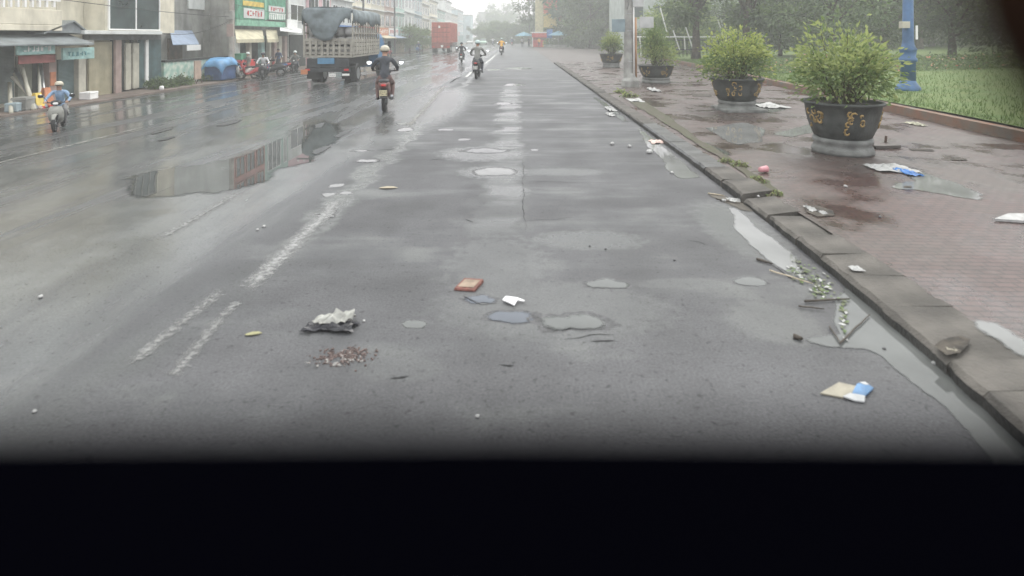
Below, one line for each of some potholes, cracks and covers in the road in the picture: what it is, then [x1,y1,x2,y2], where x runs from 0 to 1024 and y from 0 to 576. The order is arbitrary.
pothole [526,311,623,334]
pothole [479,310,542,325]
